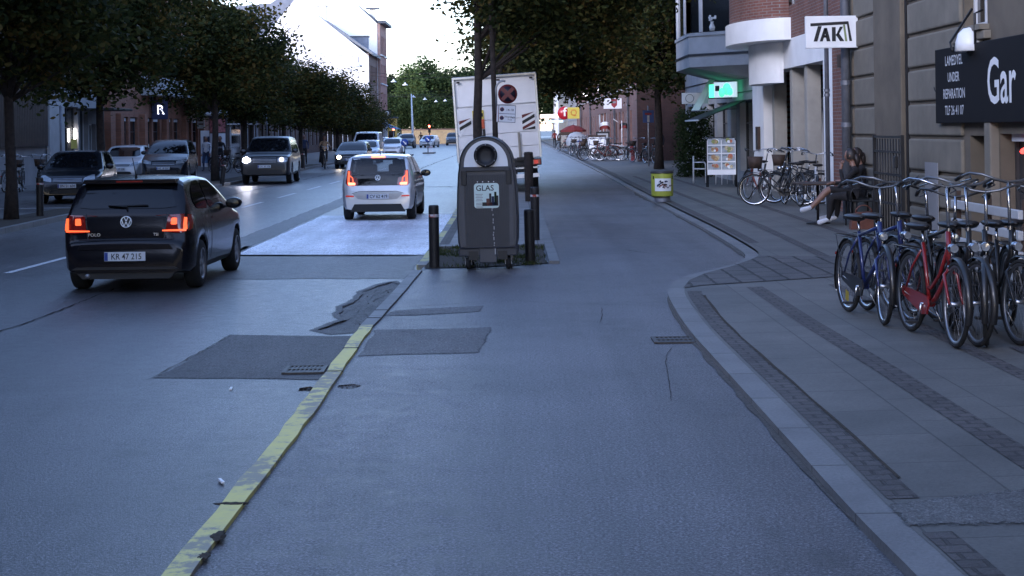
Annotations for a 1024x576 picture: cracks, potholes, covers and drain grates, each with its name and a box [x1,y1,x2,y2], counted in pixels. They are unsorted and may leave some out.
drain grate [281,365,328,374]
drain grate [651,336,696,344]
crack [0,280,140,331]
